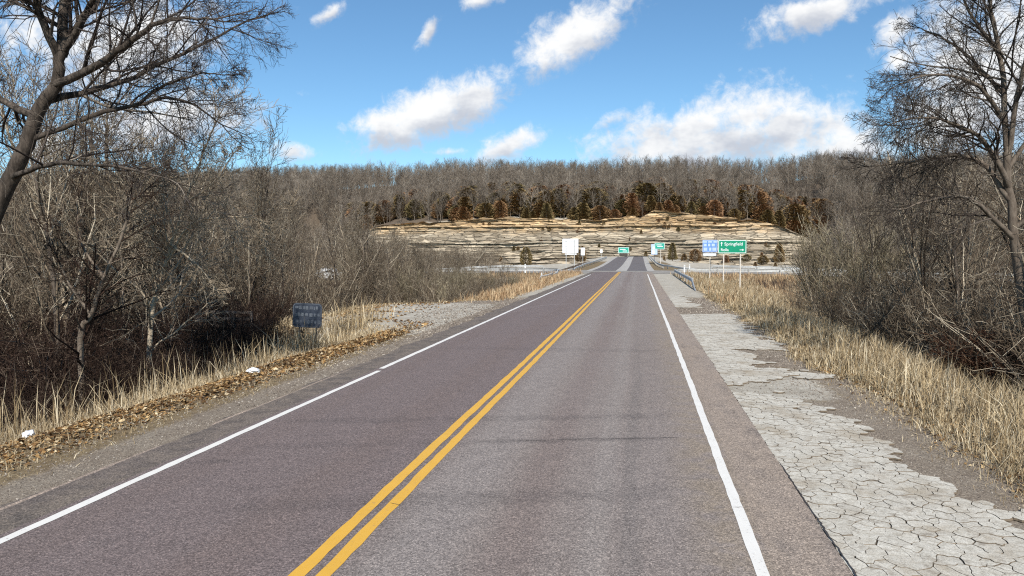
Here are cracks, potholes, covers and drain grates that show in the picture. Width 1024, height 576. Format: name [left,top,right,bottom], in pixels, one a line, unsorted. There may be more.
crack [670,296,835,385]
crack [726,383,1024,576]
